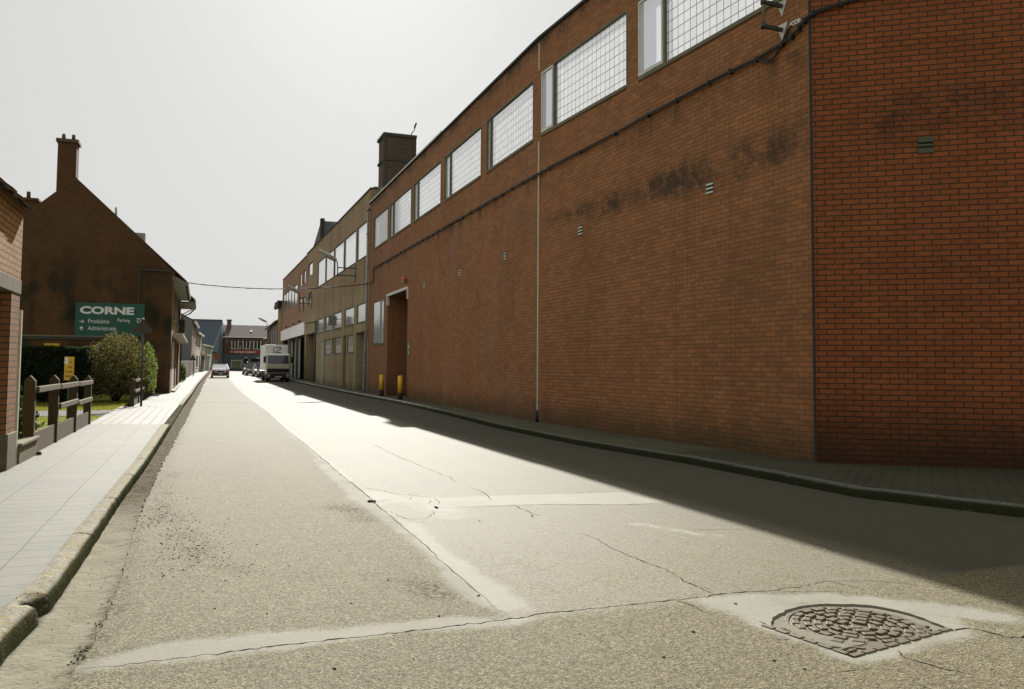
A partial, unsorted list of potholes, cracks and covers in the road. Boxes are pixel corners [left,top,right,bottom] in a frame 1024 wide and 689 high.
manhole cover [761,606,952,658]
